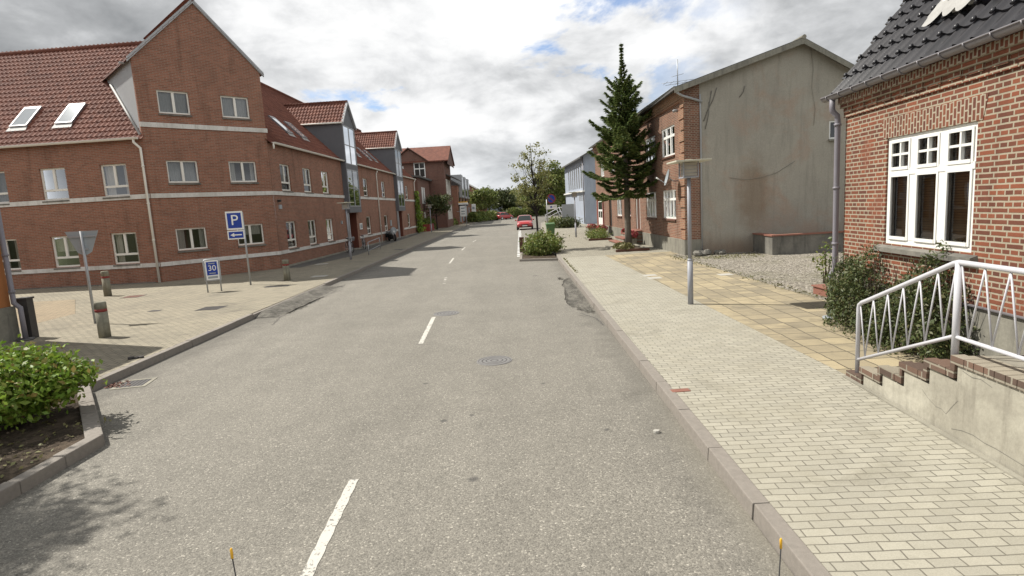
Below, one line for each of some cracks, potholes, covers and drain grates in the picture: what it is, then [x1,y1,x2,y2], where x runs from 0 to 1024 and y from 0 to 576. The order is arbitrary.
drain grate [109,377,158,390]
manhole cover [477,356,512,366]
pothole [562,278,595,314]
